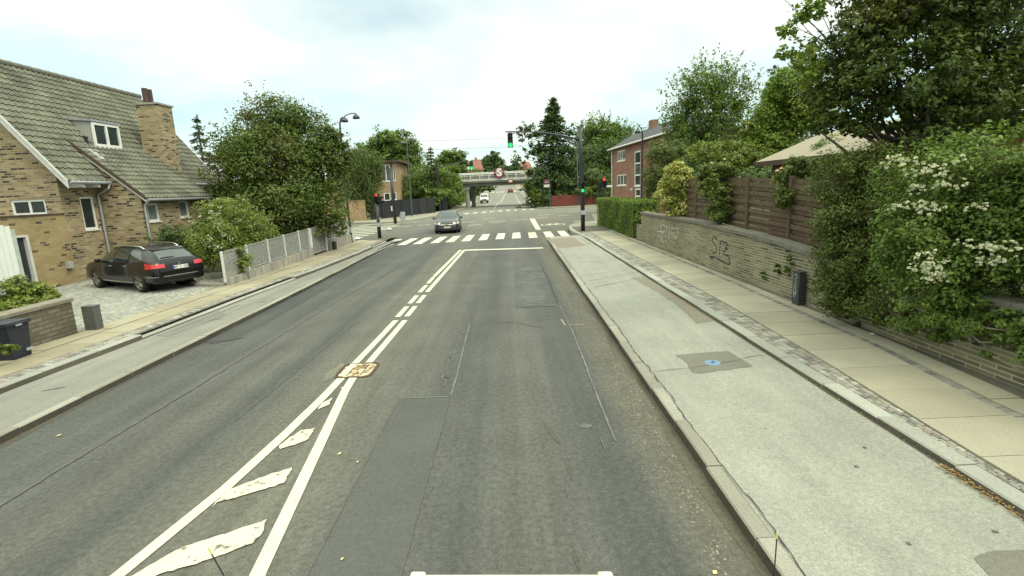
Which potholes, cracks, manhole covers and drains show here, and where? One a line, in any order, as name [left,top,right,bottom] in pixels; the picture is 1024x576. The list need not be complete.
manhole cover [334,362,380,379]
